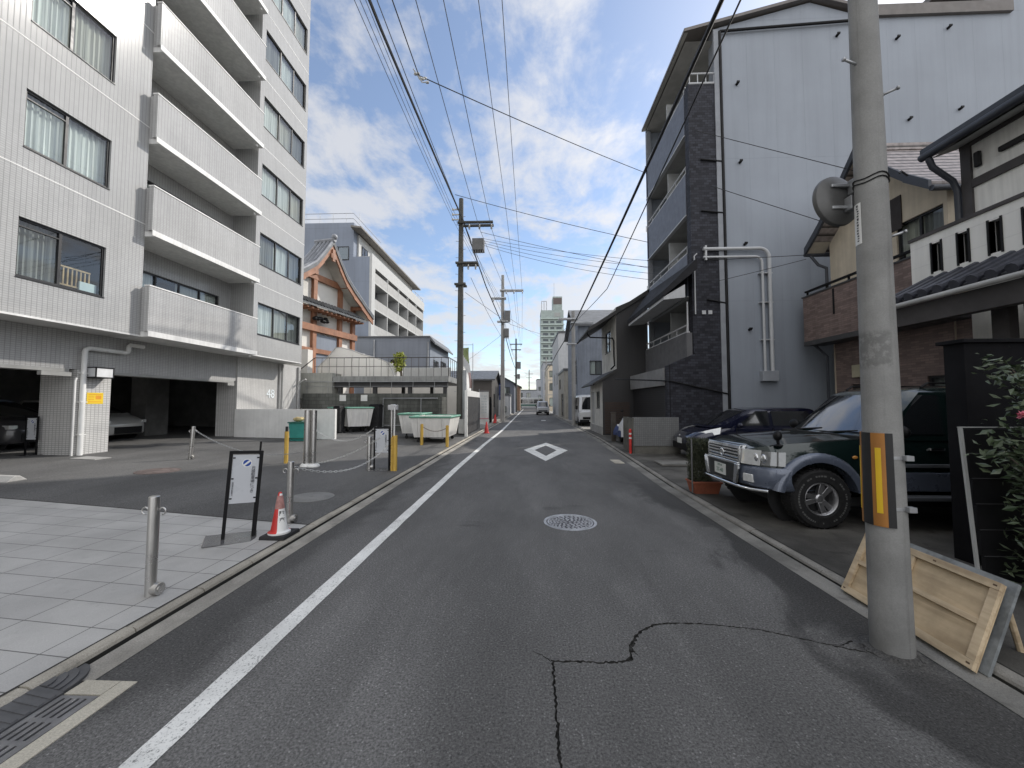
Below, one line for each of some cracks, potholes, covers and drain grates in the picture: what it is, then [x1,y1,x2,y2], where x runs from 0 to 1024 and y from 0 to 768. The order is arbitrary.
crack [533,622,867,768]
manhole cover [544,514,597,531]
drain grate [0,680,137,768]
manhole cover [293,492,335,503]
